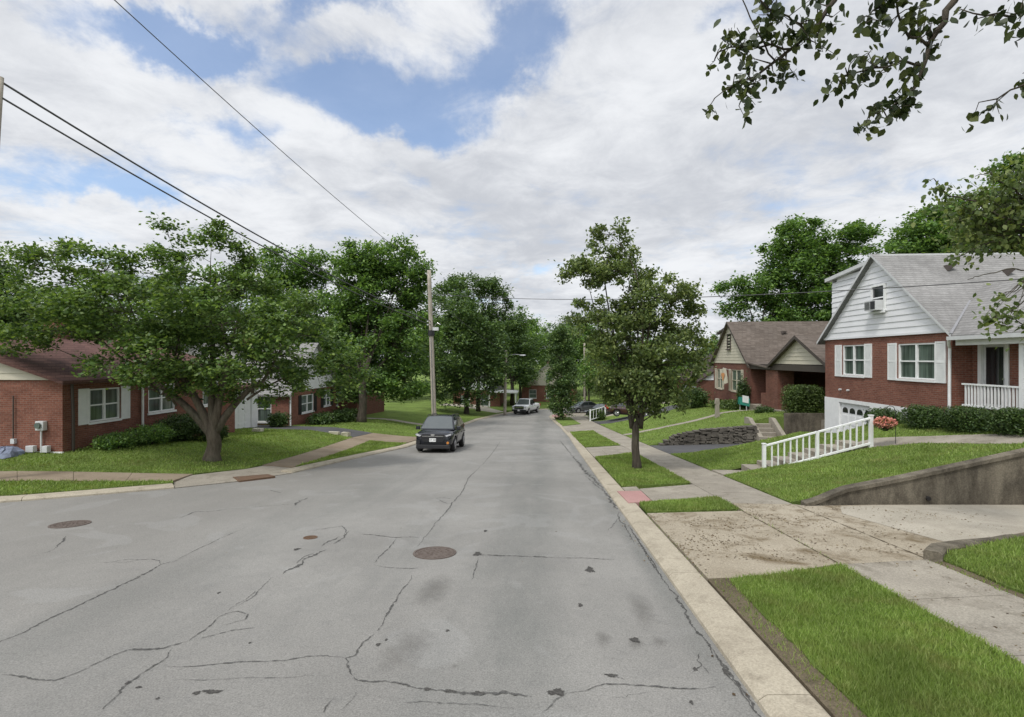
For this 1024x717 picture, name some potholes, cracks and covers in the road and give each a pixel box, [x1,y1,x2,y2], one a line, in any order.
drain grate [233,474,275,482]
manhole cover [413,546,456,560]
crack [4,526,526,713]
manhole cover [48,520,92,528]
crack [544,455,761,717]
